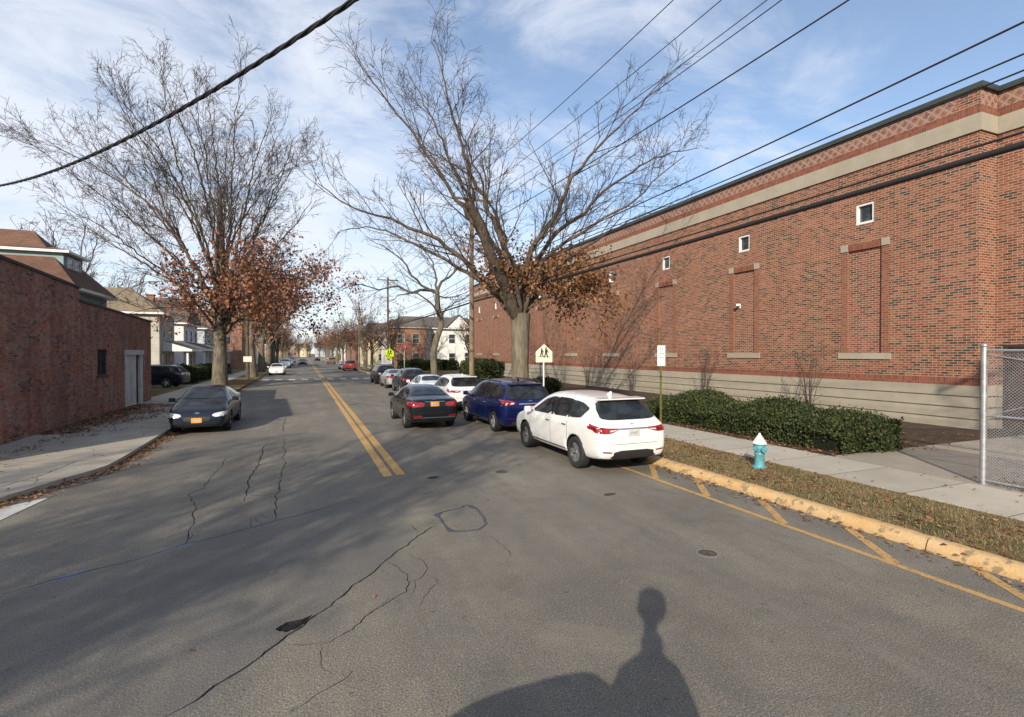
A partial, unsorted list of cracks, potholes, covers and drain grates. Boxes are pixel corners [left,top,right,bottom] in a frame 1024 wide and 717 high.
crack [287,556,460,709]
pothole [276,615,312,632]
manhole cover [696,549,720,558]
crack [243,418,328,519]
crack [186,458,227,542]
